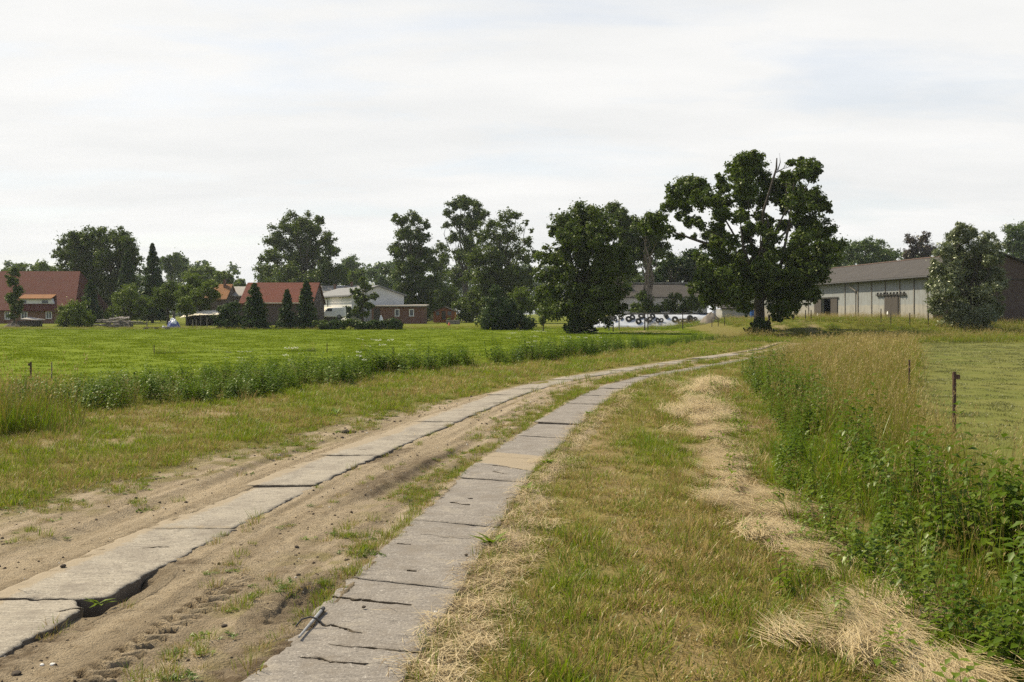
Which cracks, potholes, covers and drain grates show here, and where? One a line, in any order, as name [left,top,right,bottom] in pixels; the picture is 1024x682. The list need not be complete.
pothole [56,562,179,631]
crack [300,596,428,671]
